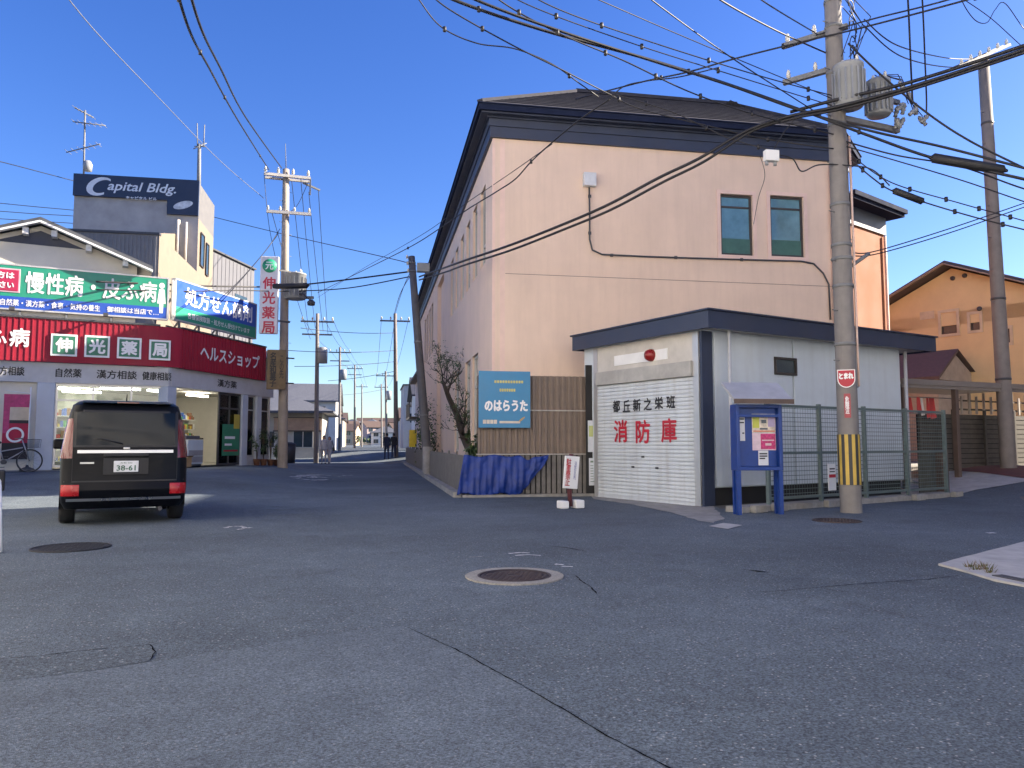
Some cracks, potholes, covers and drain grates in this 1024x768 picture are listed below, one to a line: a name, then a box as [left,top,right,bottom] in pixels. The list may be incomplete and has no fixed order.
manhole cover [465,567,564,586]
manhole cover [29,542,112,553]
